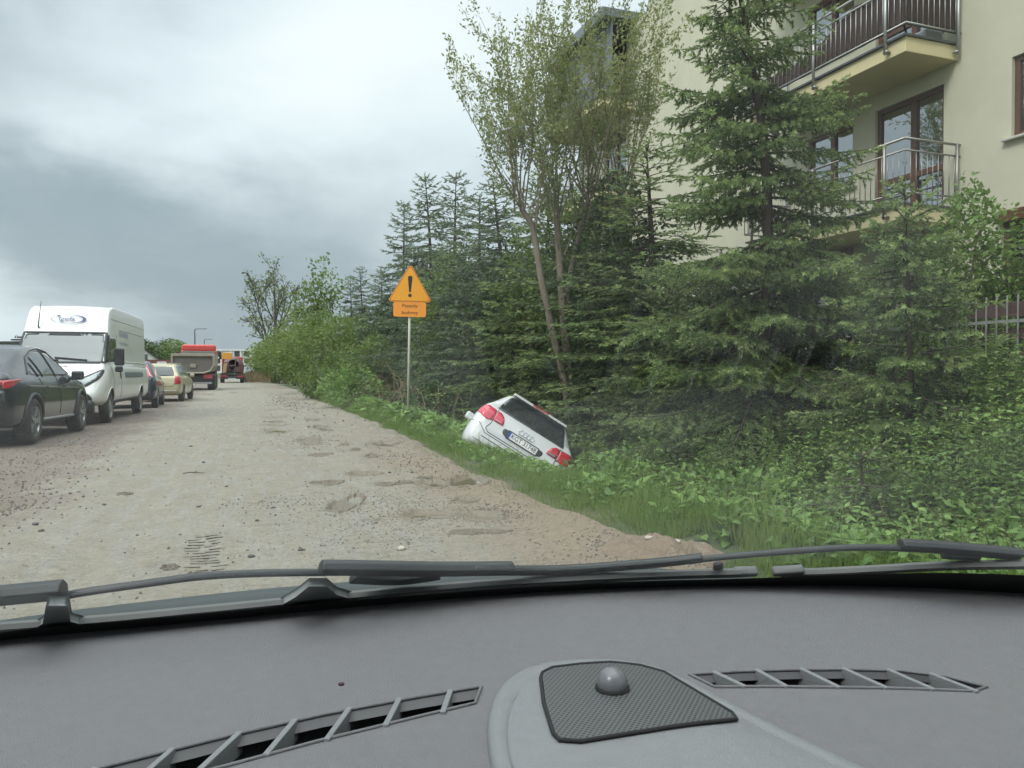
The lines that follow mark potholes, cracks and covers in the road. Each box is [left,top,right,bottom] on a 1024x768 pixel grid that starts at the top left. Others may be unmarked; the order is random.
pothole [447,473,491,489]
pothole [324,500,356,513]
pothole [369,440,400,448]
pothole [345,492,366,506]
